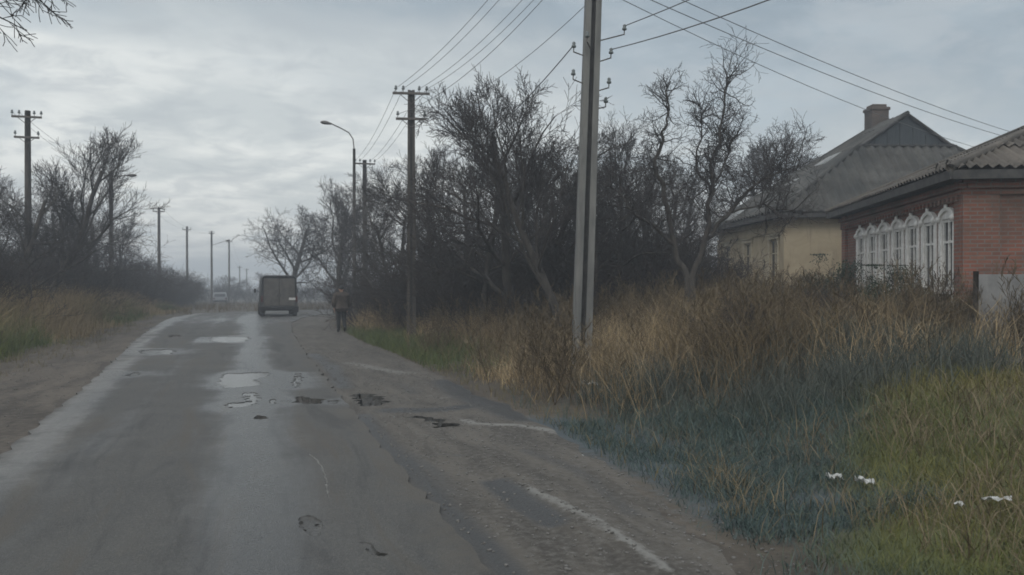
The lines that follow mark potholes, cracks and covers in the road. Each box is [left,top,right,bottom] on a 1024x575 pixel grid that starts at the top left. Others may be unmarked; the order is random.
pothole [291,396,326,404]
pothole [412,416,460,428]
pothole [224,392,263,408]
crack [310,455,329,498]
pothole [213,372,272,388]
pothole [298,515,323,538]
pothole [352,394,392,406]
